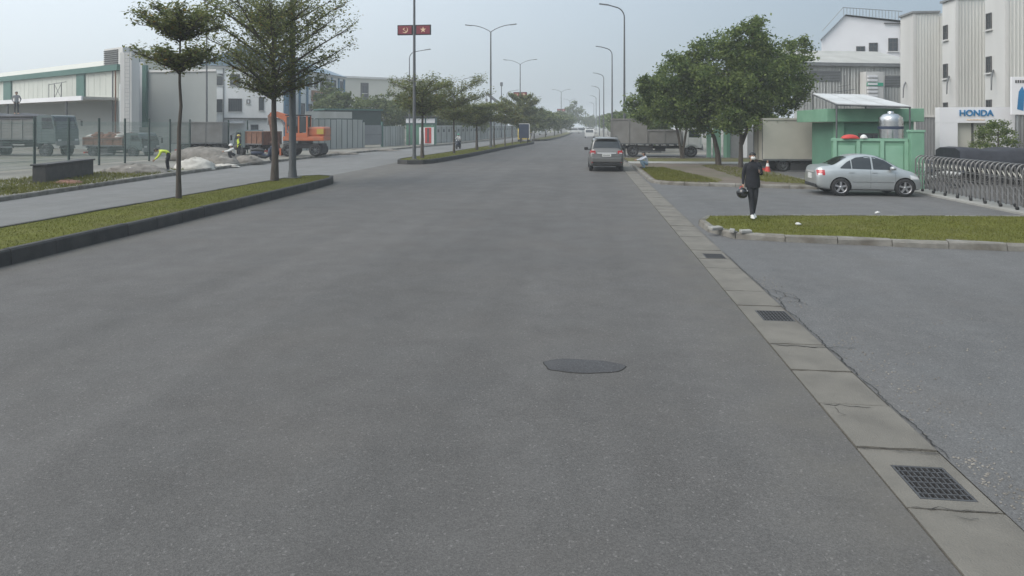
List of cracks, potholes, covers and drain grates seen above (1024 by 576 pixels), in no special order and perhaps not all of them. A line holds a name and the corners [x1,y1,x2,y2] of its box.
drain grate [755,310,796,322]
crack [919,506,1001,519]
drain grate [891,465,978,502]
crack [725,254,949,458]
